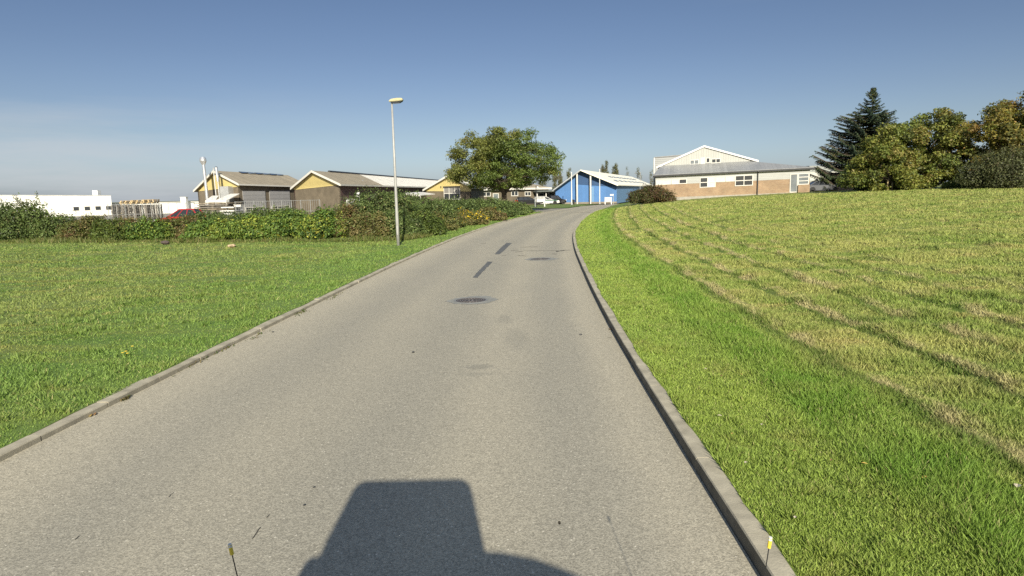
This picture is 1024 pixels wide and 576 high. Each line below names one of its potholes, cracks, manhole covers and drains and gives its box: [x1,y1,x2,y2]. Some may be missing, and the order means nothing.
manhole cover [447,296,498,304]
